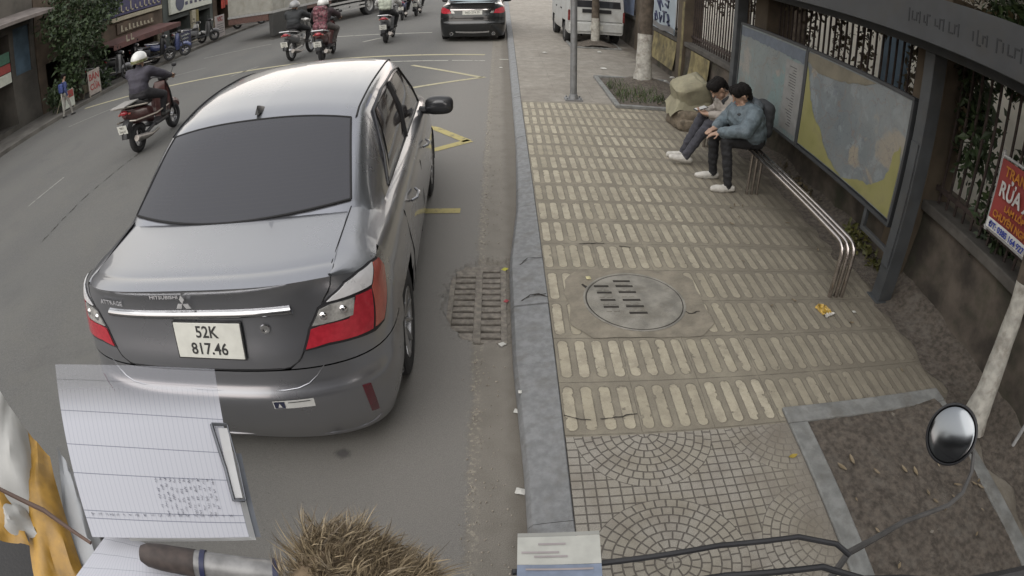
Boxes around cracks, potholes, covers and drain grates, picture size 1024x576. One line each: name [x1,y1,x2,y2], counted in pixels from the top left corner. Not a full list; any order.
drain grate [446,267,507,345]
manhole cover [565,269,714,338]
